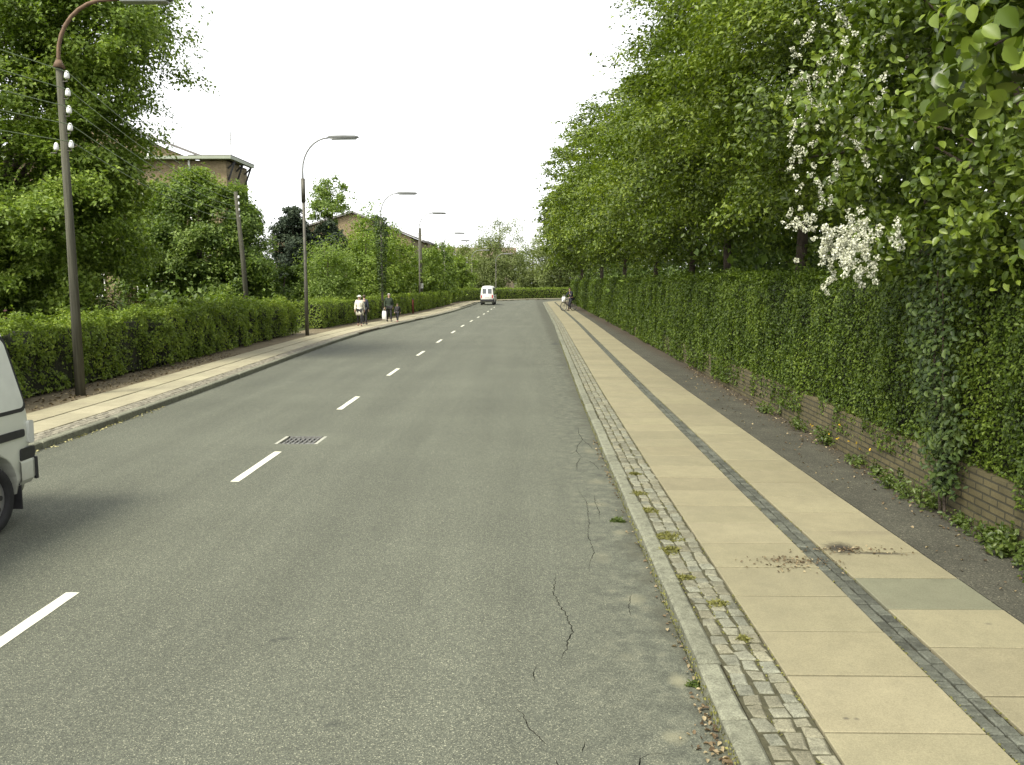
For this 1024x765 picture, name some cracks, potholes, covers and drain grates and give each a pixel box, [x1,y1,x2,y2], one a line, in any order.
crack [578,489,608,566]
crack [553,574,574,659]
